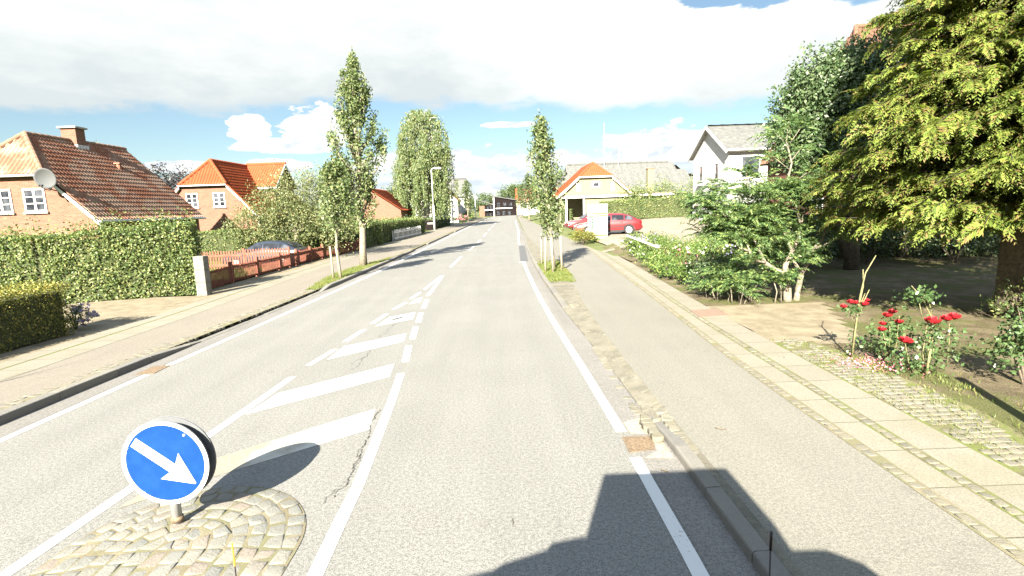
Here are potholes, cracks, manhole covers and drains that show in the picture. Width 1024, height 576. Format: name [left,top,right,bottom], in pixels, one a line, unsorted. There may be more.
drain grate [135,365,170,375]
crack [323,410,380,504]
drain grate [622,436,655,453]
